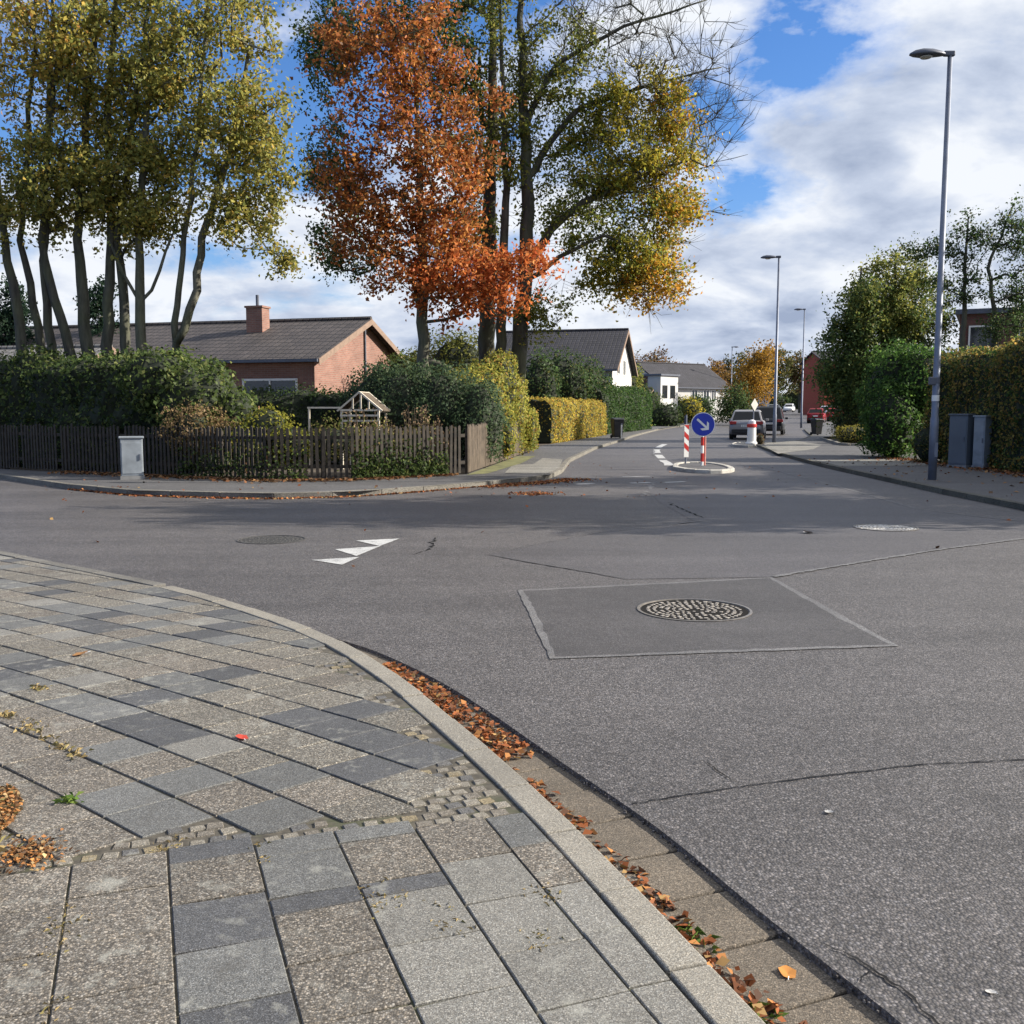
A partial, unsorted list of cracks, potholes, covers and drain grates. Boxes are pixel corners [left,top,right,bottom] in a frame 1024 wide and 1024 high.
crack [822,943,940,1024]
manhole cover [236,535,306,544]
crack [642,481,702,517]
manhole cover [637,599,753,622]
